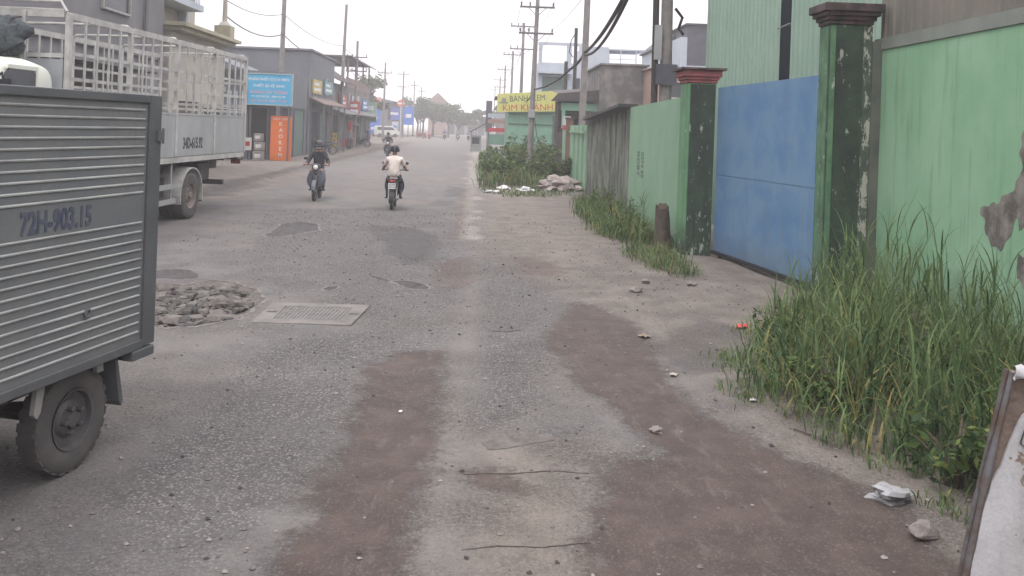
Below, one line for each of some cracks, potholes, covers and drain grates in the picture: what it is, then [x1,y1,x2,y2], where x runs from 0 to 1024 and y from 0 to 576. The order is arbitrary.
pothole [154,279,271,329]
crack [461,543,589,551]
